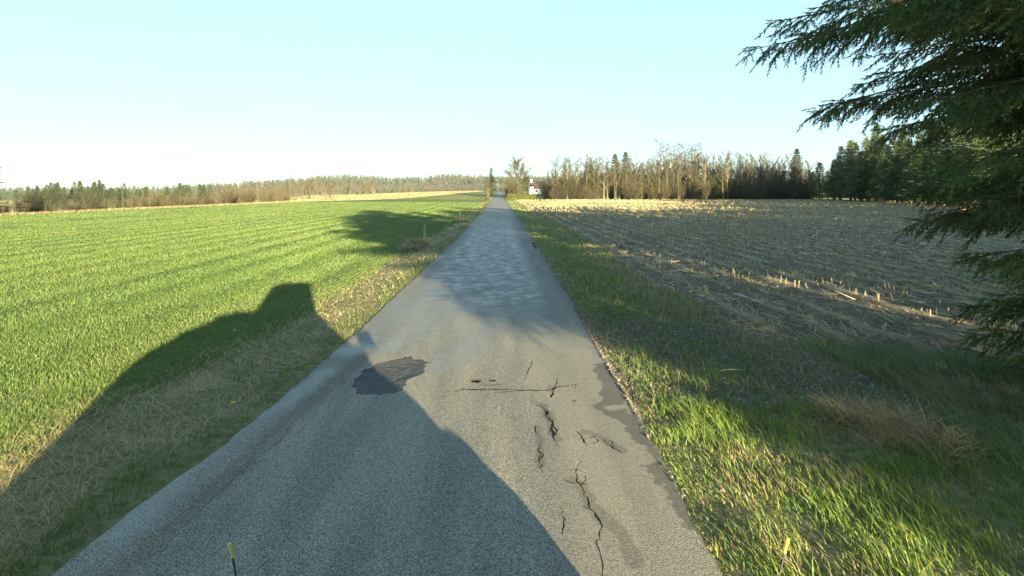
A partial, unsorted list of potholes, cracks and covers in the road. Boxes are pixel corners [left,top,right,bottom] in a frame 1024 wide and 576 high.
crack [456,360,622,576]
